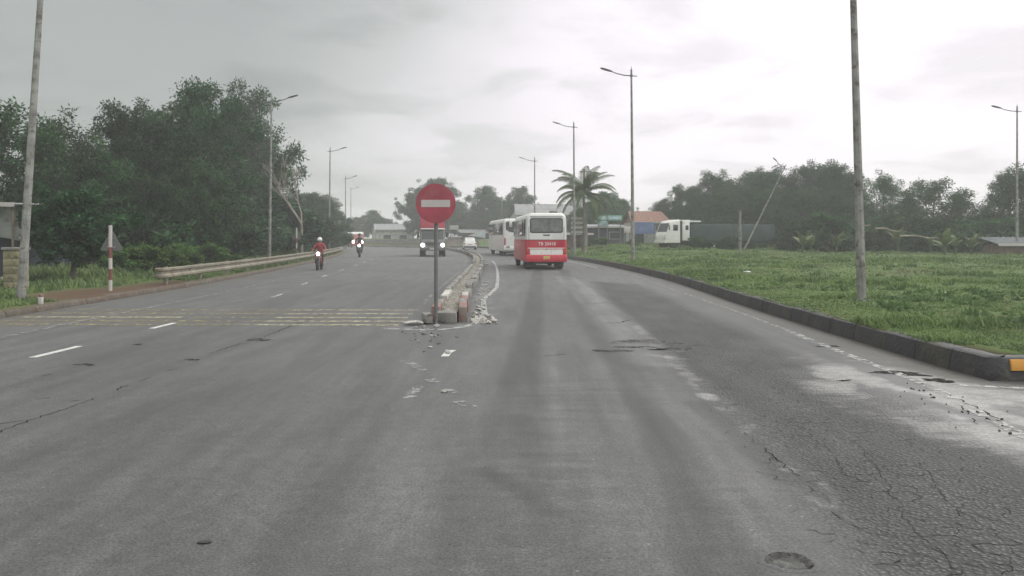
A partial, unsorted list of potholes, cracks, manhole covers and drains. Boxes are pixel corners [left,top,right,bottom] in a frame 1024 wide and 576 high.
crack [670,348,1024,576]
pothole [756,549,823,573]
